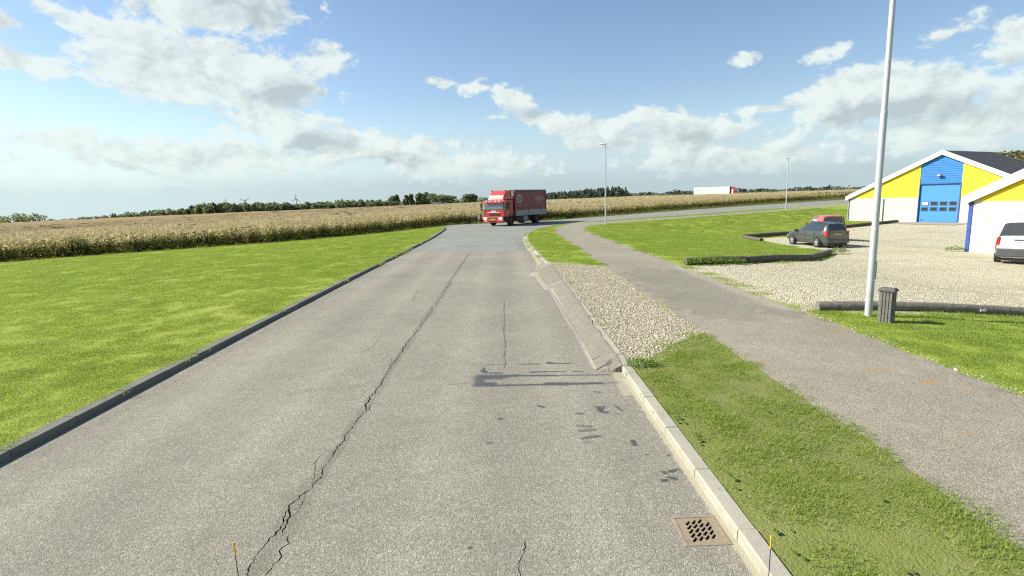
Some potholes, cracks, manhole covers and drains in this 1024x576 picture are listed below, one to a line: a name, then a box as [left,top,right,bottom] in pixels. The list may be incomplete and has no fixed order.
crack [247,259,466,576]
drain grate [671,515,733,547]
